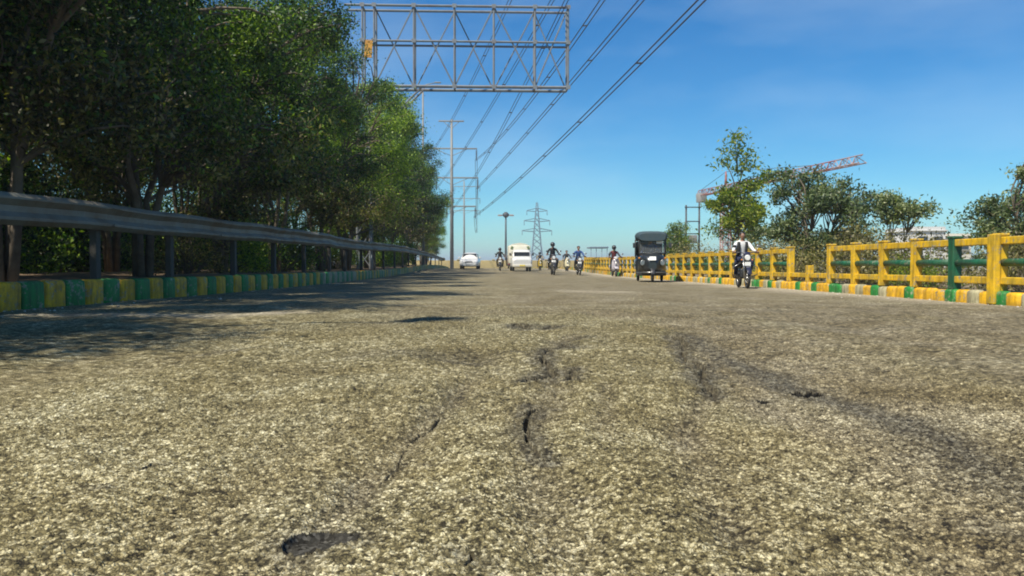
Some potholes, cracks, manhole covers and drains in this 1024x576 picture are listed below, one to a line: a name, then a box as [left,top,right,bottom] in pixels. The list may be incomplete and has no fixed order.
crack [360,410,484,507]
crack [665,335,728,401]
pothole [786,391,826,399]
crack [512,323,587,383]
crack [518,405,573,463]
pothole [272,530,369,561]
